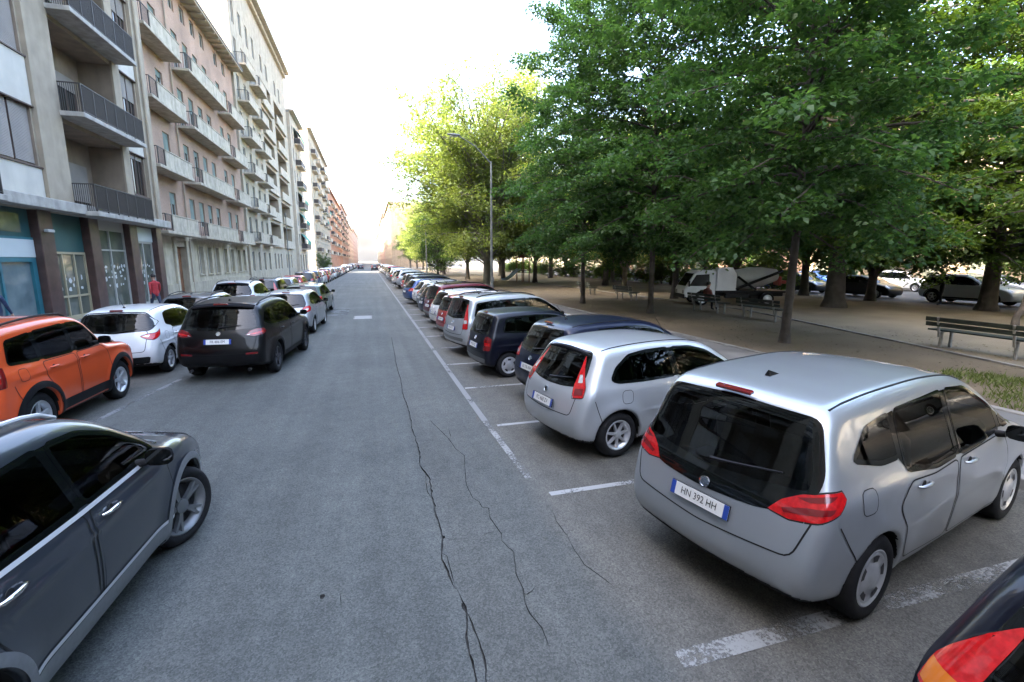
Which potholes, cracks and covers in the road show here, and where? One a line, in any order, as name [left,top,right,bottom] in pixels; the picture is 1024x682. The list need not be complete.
crack [552,510,615,589]
crack [391,338,551,682]
